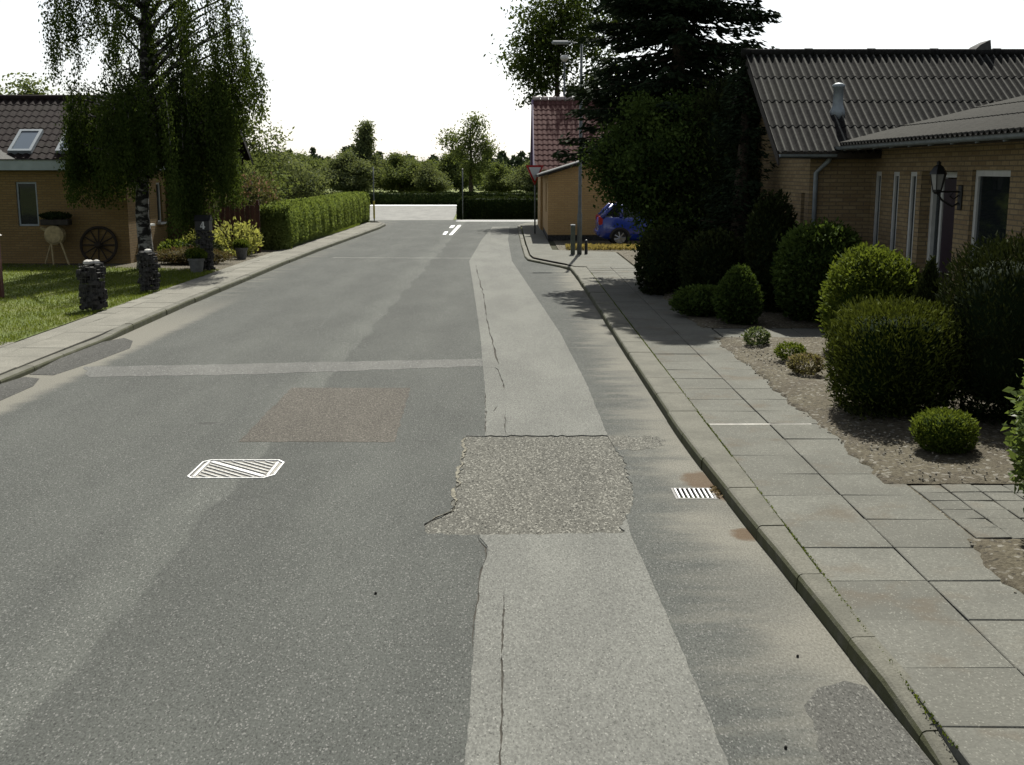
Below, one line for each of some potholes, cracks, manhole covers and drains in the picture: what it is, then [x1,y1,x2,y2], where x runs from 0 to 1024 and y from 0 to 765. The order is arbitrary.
drain grate [670,488,718,499]
crack [476,270,504,432]
